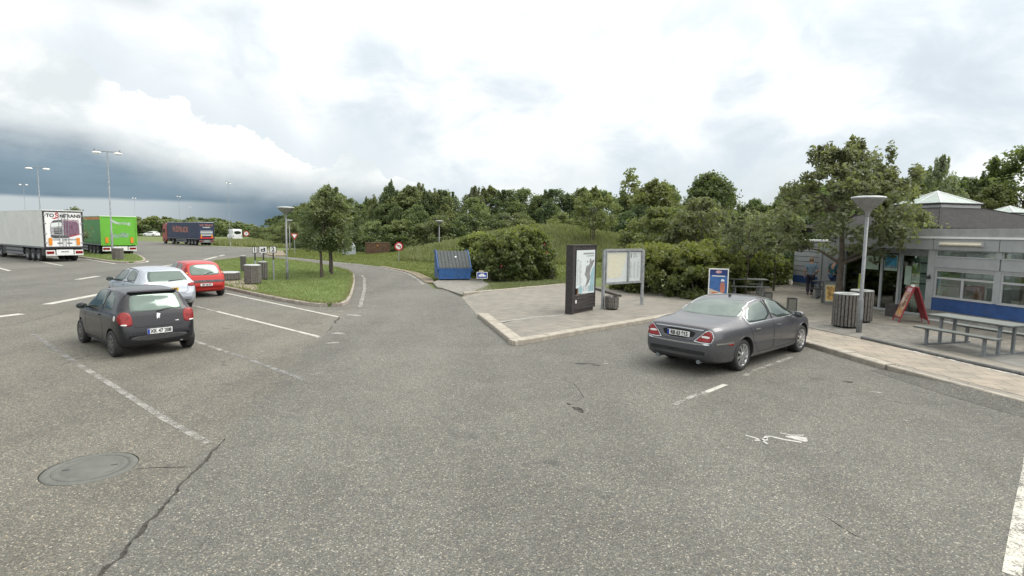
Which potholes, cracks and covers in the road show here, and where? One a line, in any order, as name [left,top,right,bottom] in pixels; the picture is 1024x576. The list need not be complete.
manhole cover [37,453,139,486]
crack [97,439,225,576]
